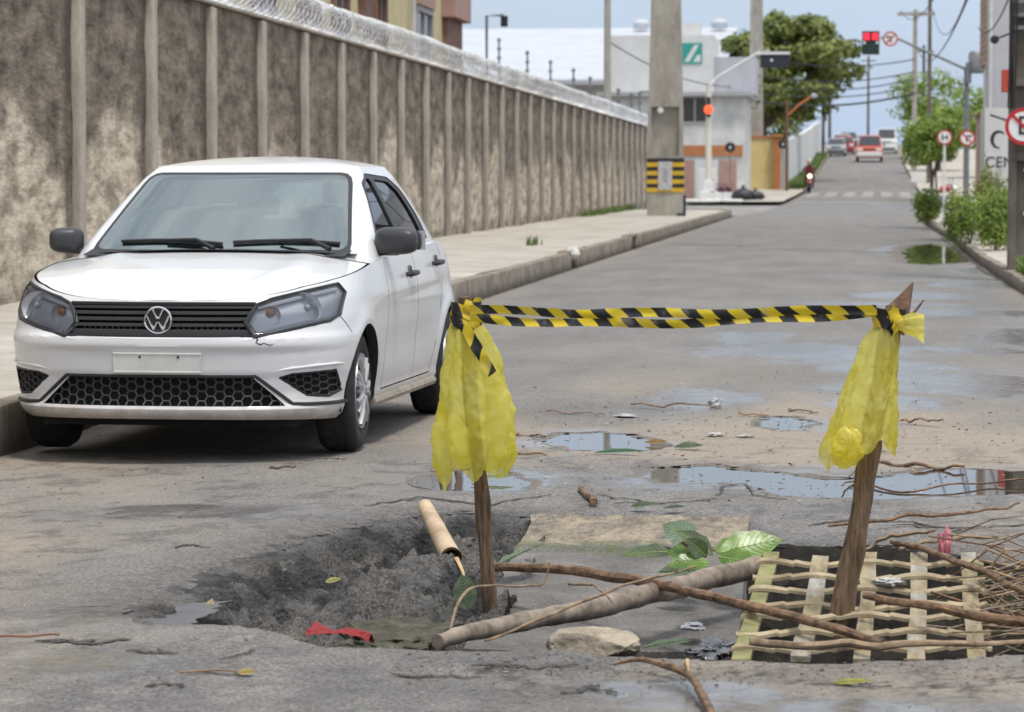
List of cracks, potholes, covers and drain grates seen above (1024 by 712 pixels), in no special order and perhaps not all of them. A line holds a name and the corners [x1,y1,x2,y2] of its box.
crack [363,494,551,506]
crack [596,483,786,504]
pothole [121,510,545,651]
pothole [519,516,1024,664]
